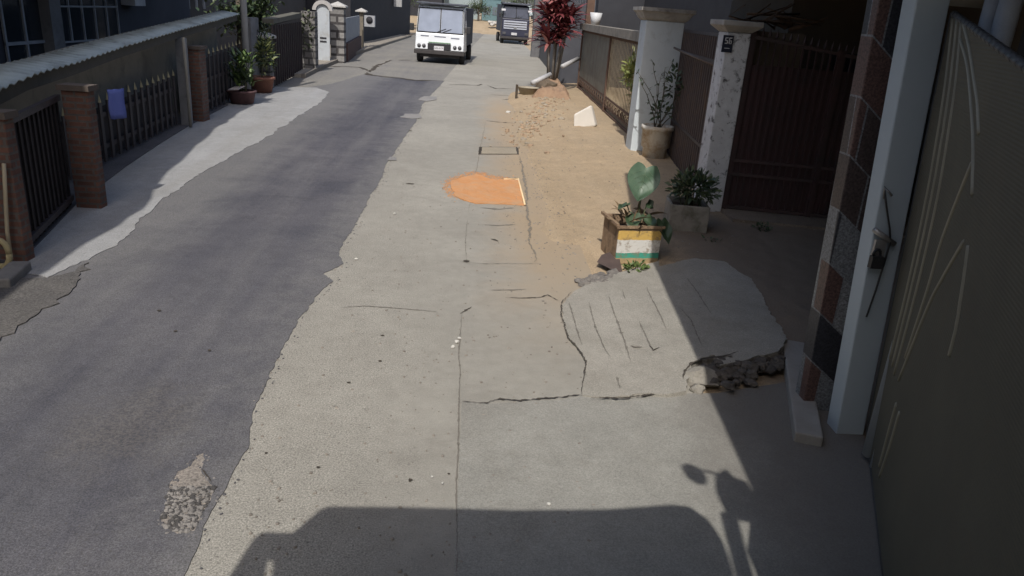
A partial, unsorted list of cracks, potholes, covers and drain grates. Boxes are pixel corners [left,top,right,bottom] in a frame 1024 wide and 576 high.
crack [508,278,738,391]
crack [331,60,435,81]
pothole [154,450,218,537]
